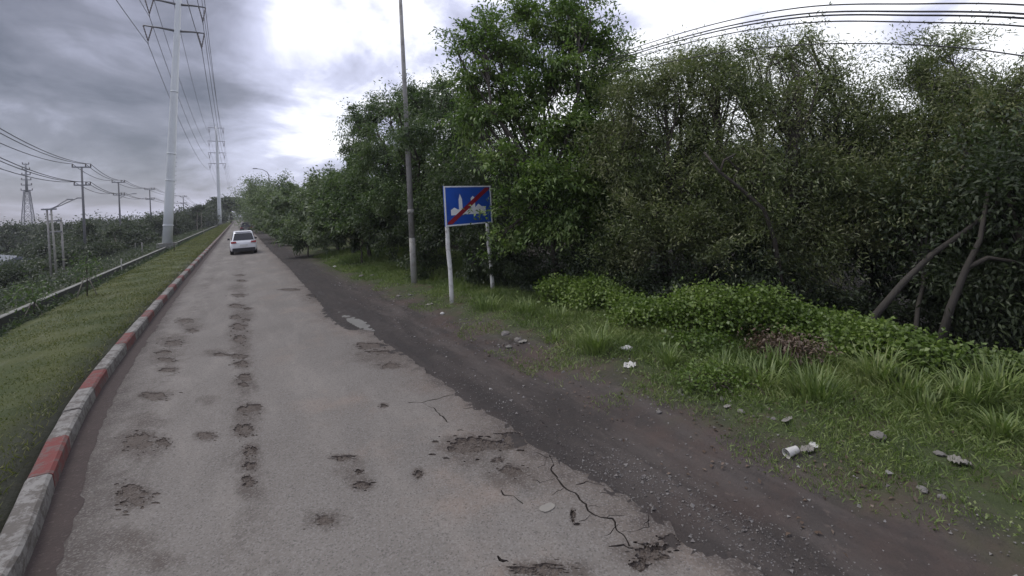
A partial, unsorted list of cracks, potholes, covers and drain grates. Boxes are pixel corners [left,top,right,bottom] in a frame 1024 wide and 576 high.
pothole [330,453,377,491]
pothole [237,403,263,416]
crack [408,394,472,431]
pothole [114,430,173,456]
crack [501,452,650,546]
pothole [152,348,178,362]
pothole [114,479,161,516]
pothole [506,559,583,576]
pothole [428,432,524,462]
pothole [233,423,258,442]
pothole [139,392,183,401]
pothole [625,533,681,572]
